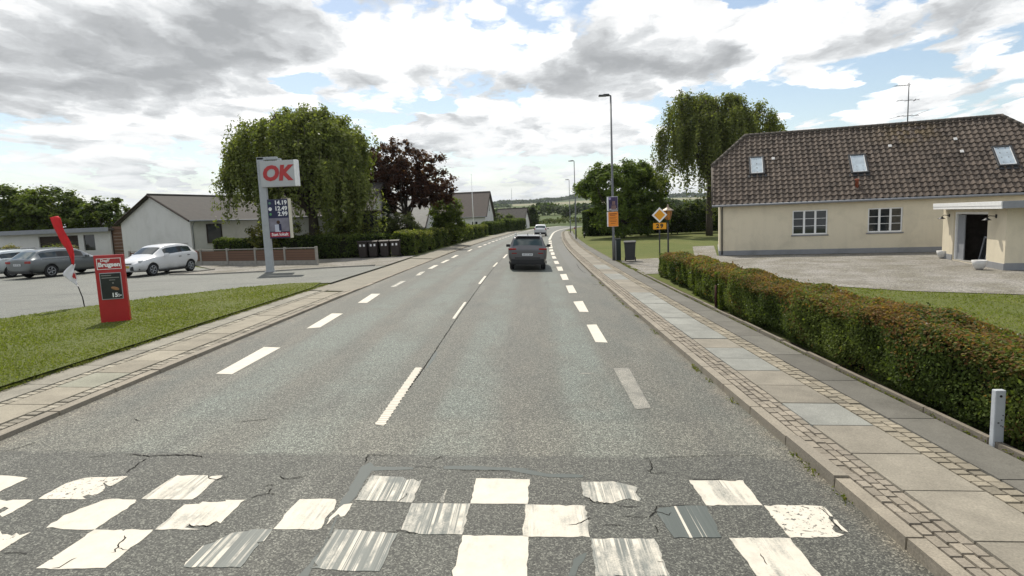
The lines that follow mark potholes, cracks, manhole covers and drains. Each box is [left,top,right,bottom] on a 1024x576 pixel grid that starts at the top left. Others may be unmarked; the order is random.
crack [643,455,764,474]
crack [570,496,679,532]
